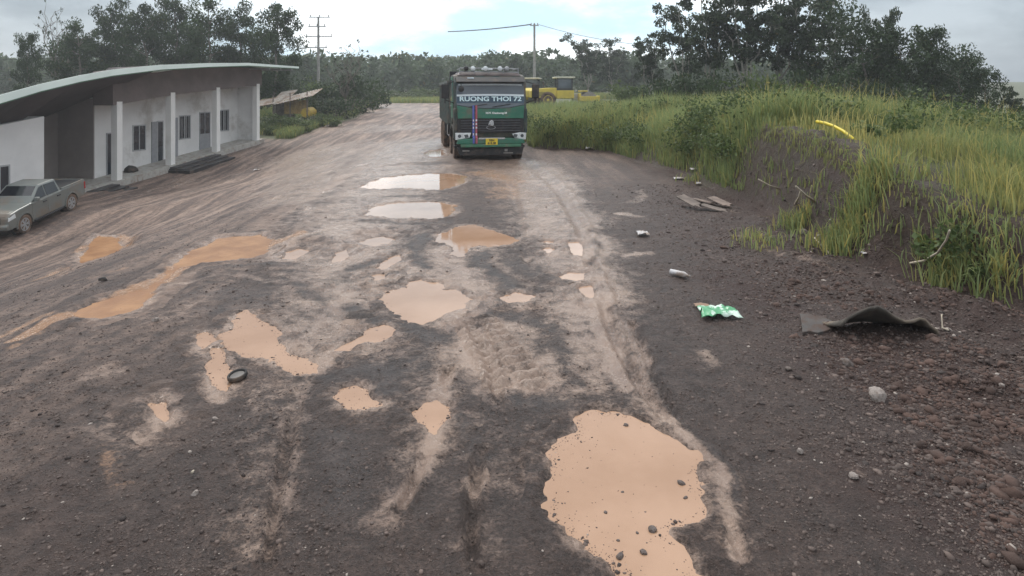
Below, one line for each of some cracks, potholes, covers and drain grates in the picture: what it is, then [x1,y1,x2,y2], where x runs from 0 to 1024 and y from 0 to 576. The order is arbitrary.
pothole [29,229,295,330]
pothole [360,274,482,330]
pothole [512,394,751,576]
pothole [383,383,486,456]
pothole [311,315,421,360]
pothole [356,200,466,220]
pothole [211,303,343,387]
pothole [170,323,224,357]
pothole [422,222,528,261]
pothole [302,373,408,425]
pothole [264,242,328,262]
